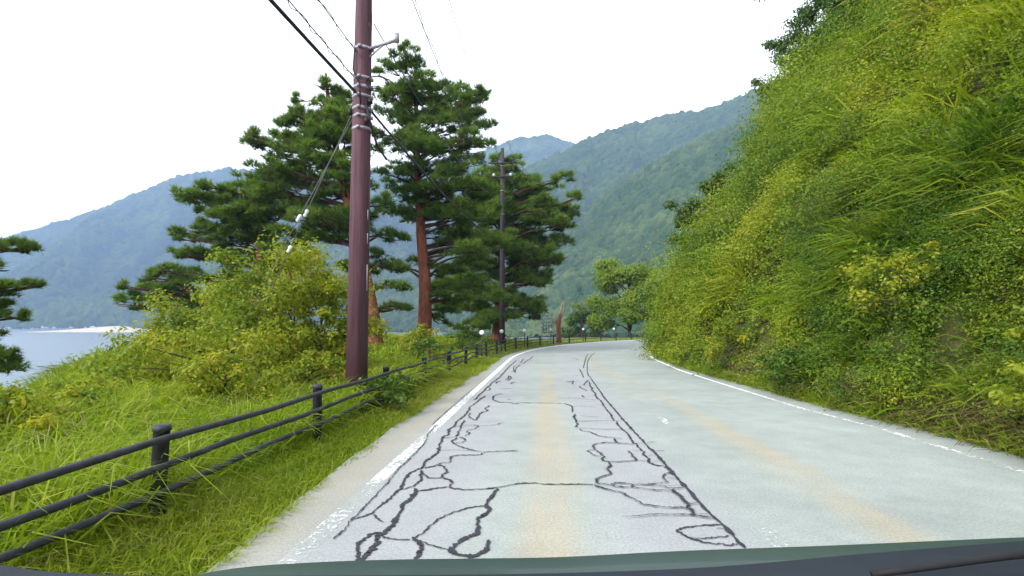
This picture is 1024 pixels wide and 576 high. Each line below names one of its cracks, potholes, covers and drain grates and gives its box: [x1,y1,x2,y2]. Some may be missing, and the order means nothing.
crack [333,356,593,561]
crack [564,354,737,546]
